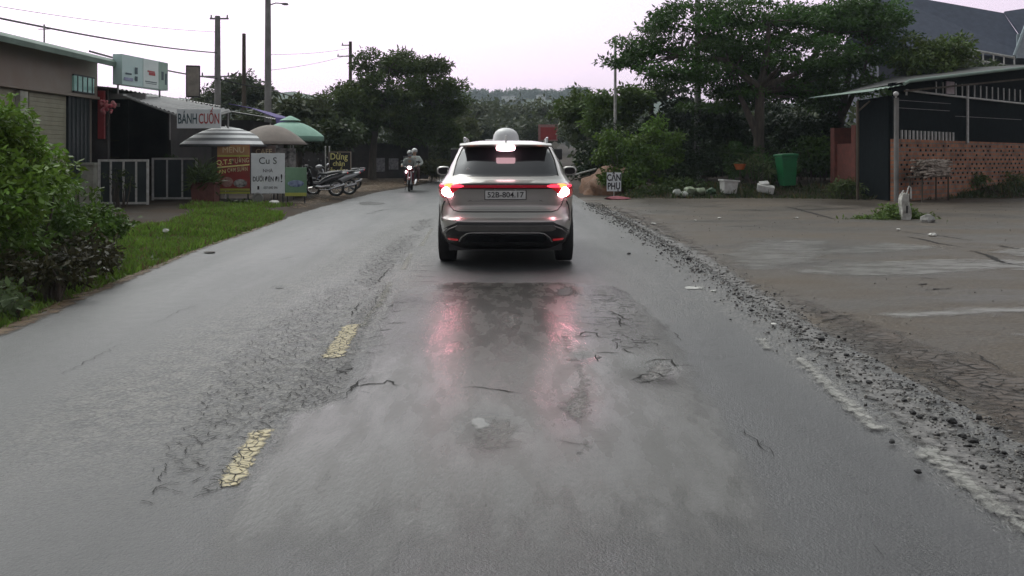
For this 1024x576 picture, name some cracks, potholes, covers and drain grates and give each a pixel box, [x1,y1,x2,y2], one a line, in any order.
crack [568,290,692,382]
pothole [476,422,517,448]
crack [141,219,432,504]
